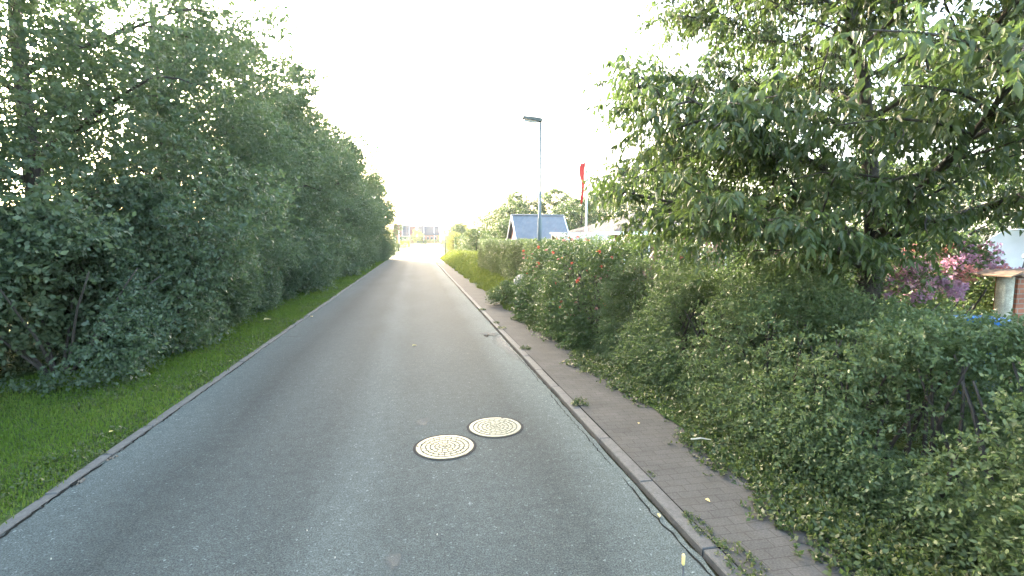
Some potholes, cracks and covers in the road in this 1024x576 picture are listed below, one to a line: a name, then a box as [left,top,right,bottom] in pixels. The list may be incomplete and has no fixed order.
manhole cover [413,434,477,460]
manhole cover [467,417,524,438]
